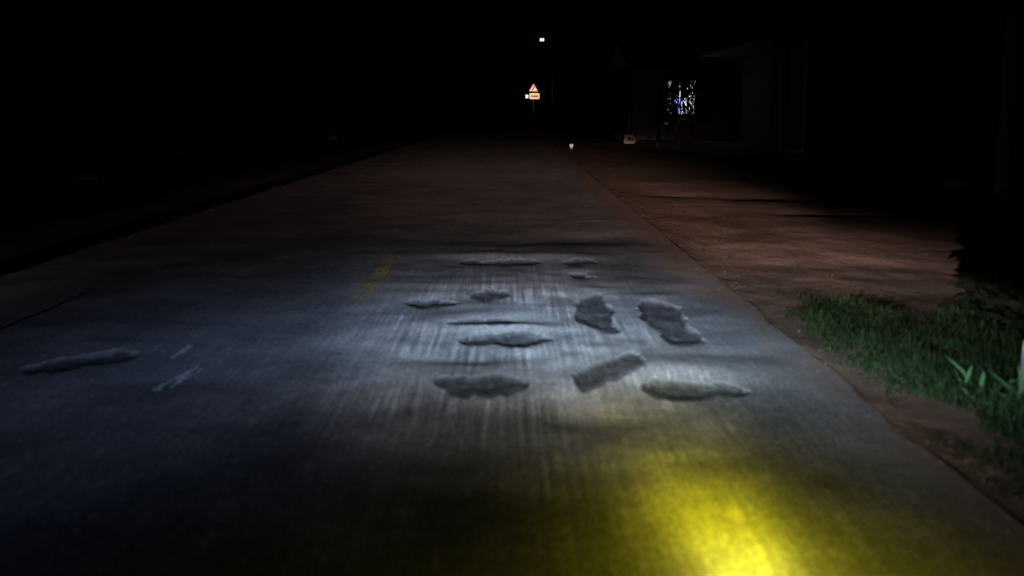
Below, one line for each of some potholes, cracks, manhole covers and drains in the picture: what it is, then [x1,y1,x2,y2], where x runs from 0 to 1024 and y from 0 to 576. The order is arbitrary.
pothole [572,350,648,393]
pothole [561,257,598,267]
pothole [470,288,511,303]
pothole [18,347,141,376]
pothole [457,329,555,350]
pothole [634,298,707,347]
pothole [640,377,752,403]
pothole [431,371,531,400]
pothole [567,272,597,280]
pothole [573,292,622,335]
pothole [403,298,459,310]
pothole [458,257,542,268]
